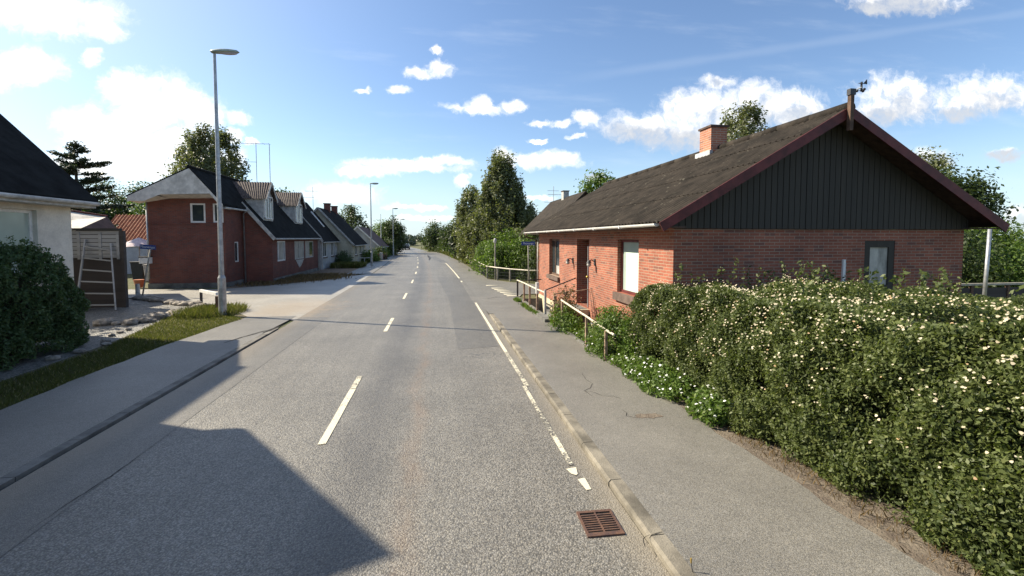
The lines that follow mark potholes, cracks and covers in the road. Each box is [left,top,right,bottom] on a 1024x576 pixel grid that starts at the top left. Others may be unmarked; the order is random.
drain grate [576,509,625,538]
